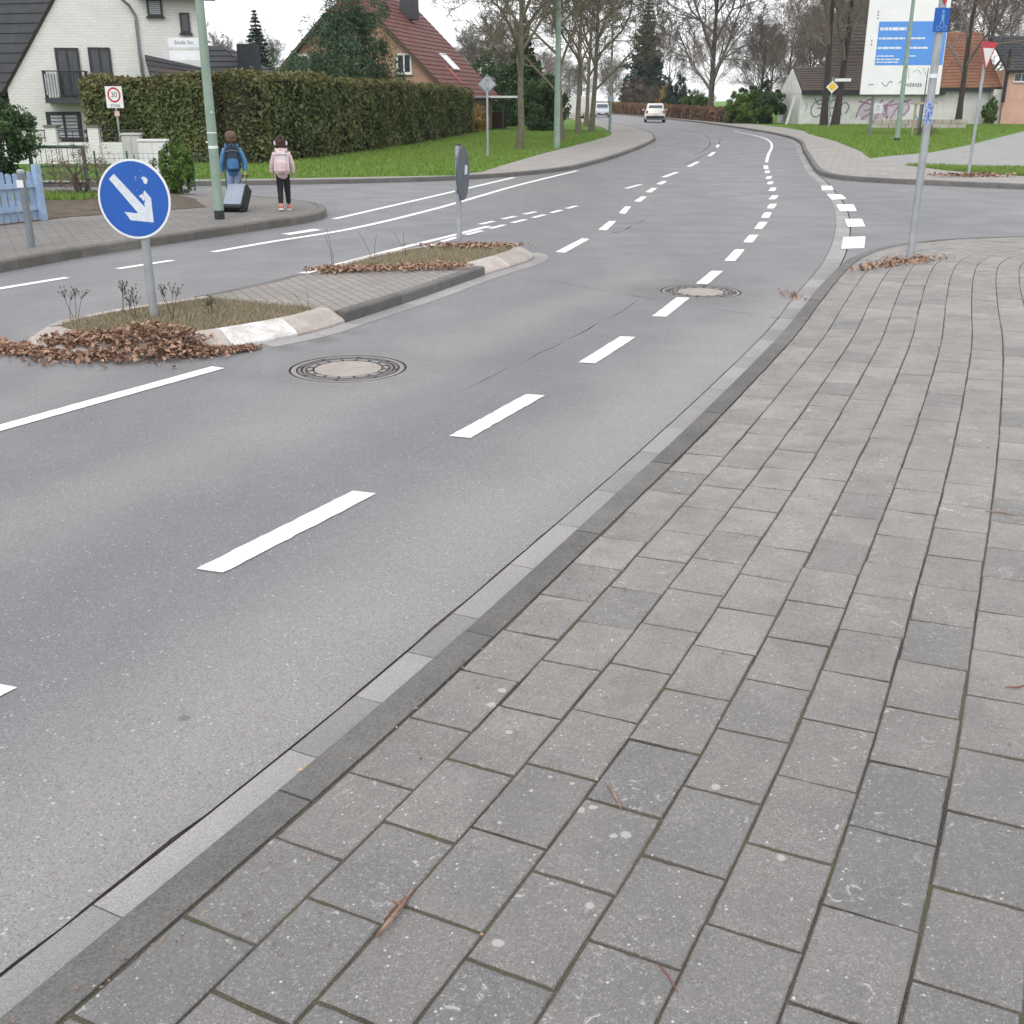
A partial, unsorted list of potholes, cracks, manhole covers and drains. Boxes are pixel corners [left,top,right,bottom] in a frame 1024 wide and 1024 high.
manhole cover [289,355,407,383]
manhole cover [660,285,742,298]
